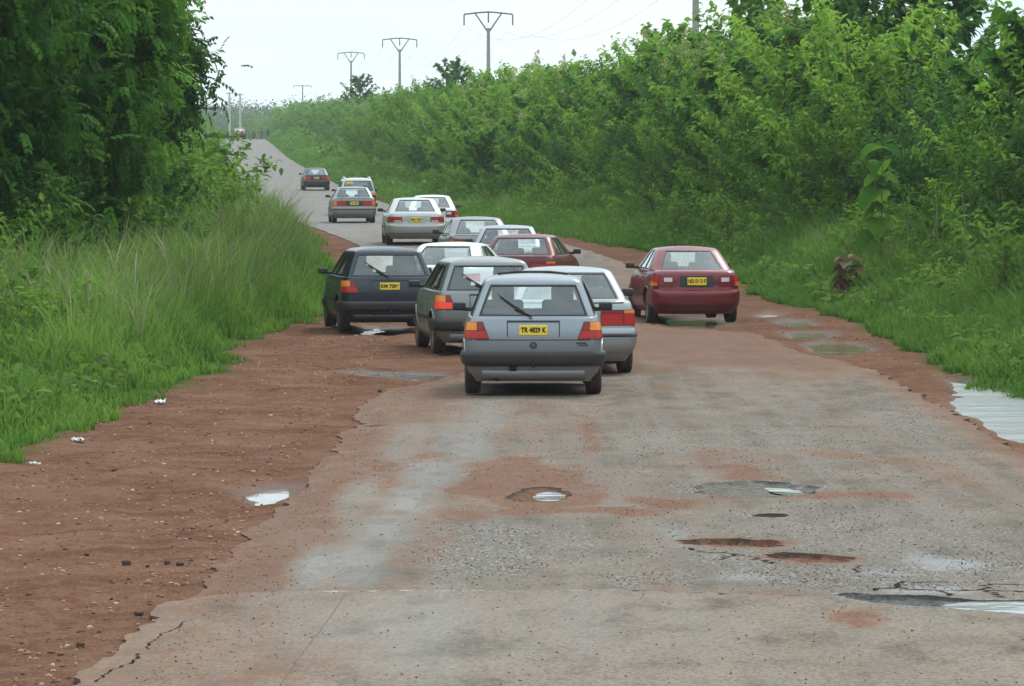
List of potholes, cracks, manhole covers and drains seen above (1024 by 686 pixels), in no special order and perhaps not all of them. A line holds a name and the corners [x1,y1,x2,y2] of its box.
pothole [764,552,856,563]
crack [94,620,190,682]
pothole [838,593,1024,614]
pothole [676,538,784,547]
pothole [693,480,821,498]
pothole [506,487,572,502]
